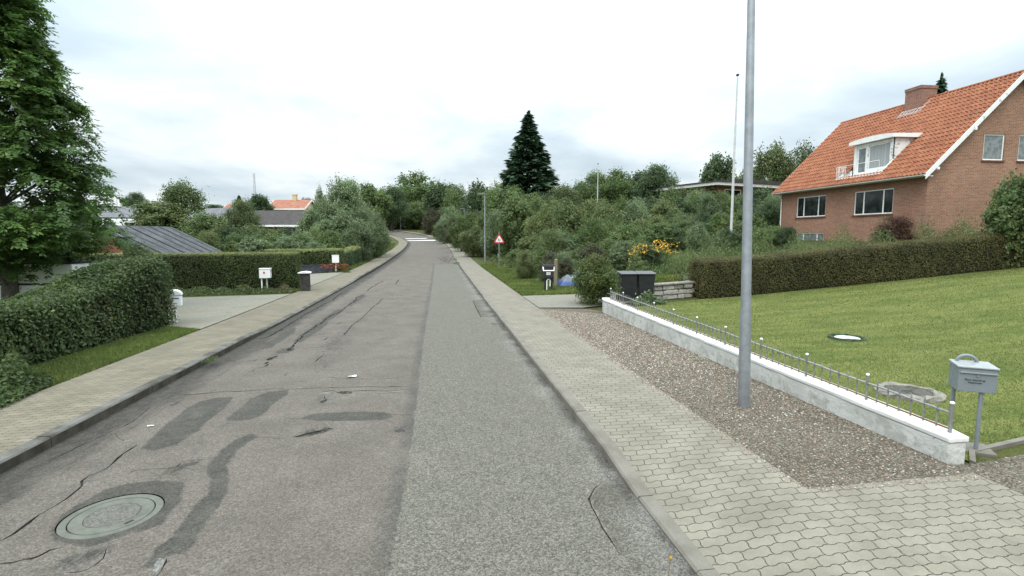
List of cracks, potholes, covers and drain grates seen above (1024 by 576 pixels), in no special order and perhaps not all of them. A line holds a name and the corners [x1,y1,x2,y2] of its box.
crack [588,476,619,553]
crack [0,406,201,573]
crack [184,280,417,400]
manhole cover [55,494,165,540]
